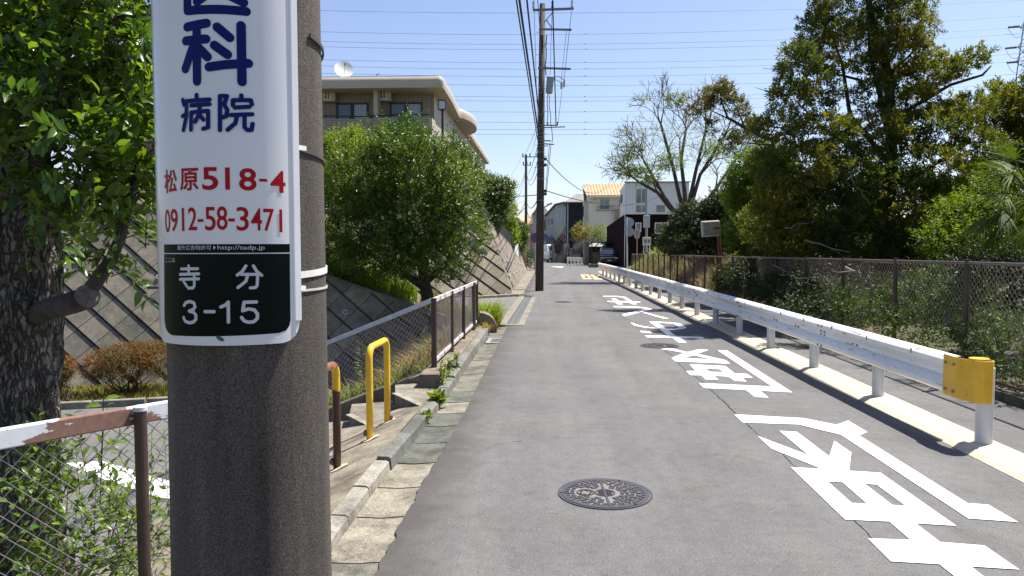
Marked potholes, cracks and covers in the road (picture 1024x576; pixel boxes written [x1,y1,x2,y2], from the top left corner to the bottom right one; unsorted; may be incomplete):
drain grate [499,296,537,327]
manhole cover [558,478,653,510]
